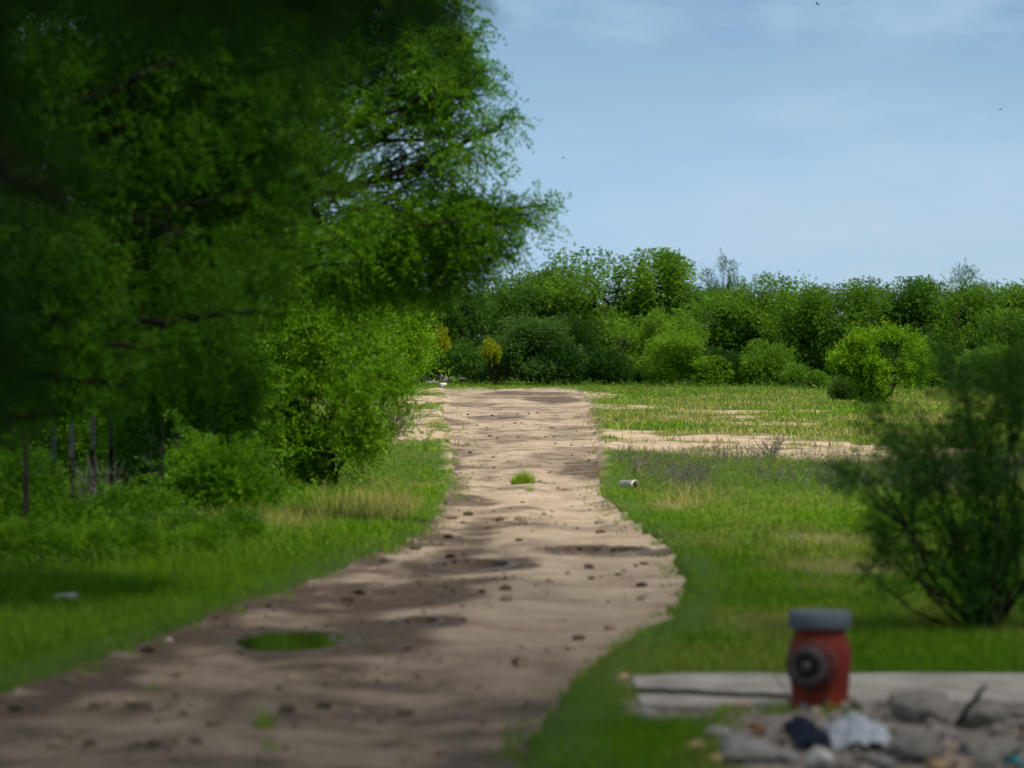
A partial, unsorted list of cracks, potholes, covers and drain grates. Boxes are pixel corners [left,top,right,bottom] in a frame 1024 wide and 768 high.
pothole [526,544,654,557]
pothole [420,558,517,572]
pothole [219,629,361,655]
pothole [395,616,444,627]
